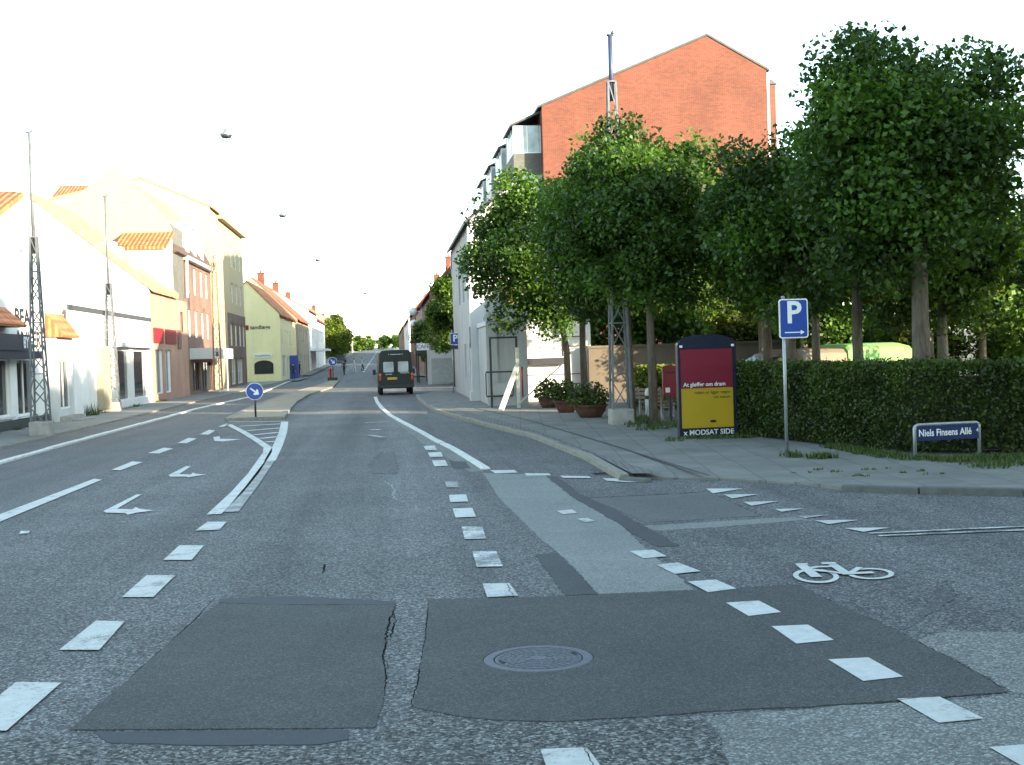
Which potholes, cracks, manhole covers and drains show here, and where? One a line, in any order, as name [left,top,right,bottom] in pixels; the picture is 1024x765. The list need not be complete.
crack [385,466,409,505]
manhole cover [484,645,593,672]
crack [382,609,397,691]
crack [410,607,429,709]
